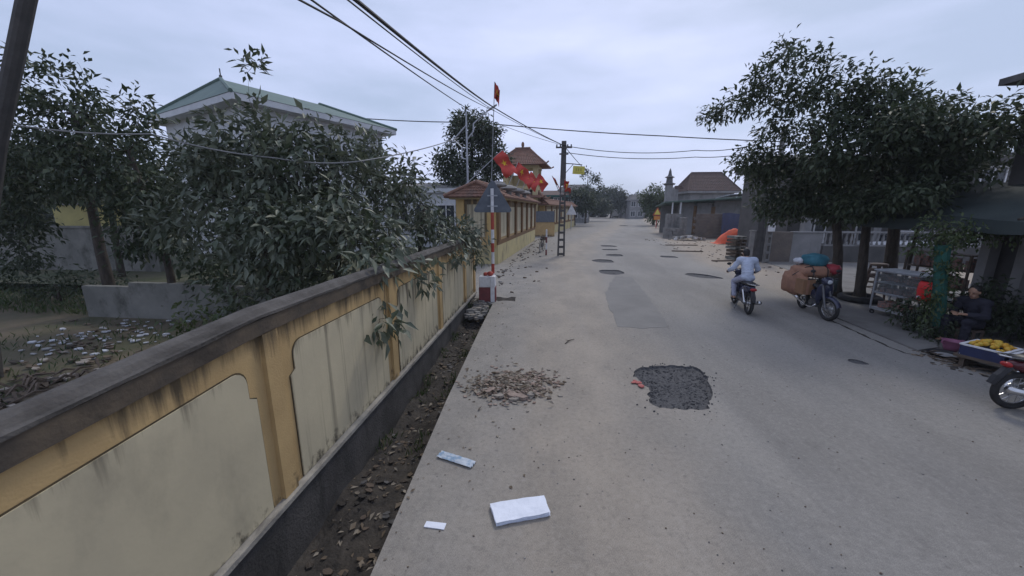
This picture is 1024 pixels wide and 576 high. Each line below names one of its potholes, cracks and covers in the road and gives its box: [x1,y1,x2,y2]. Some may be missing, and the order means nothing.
pothole [630,363,723,420]
